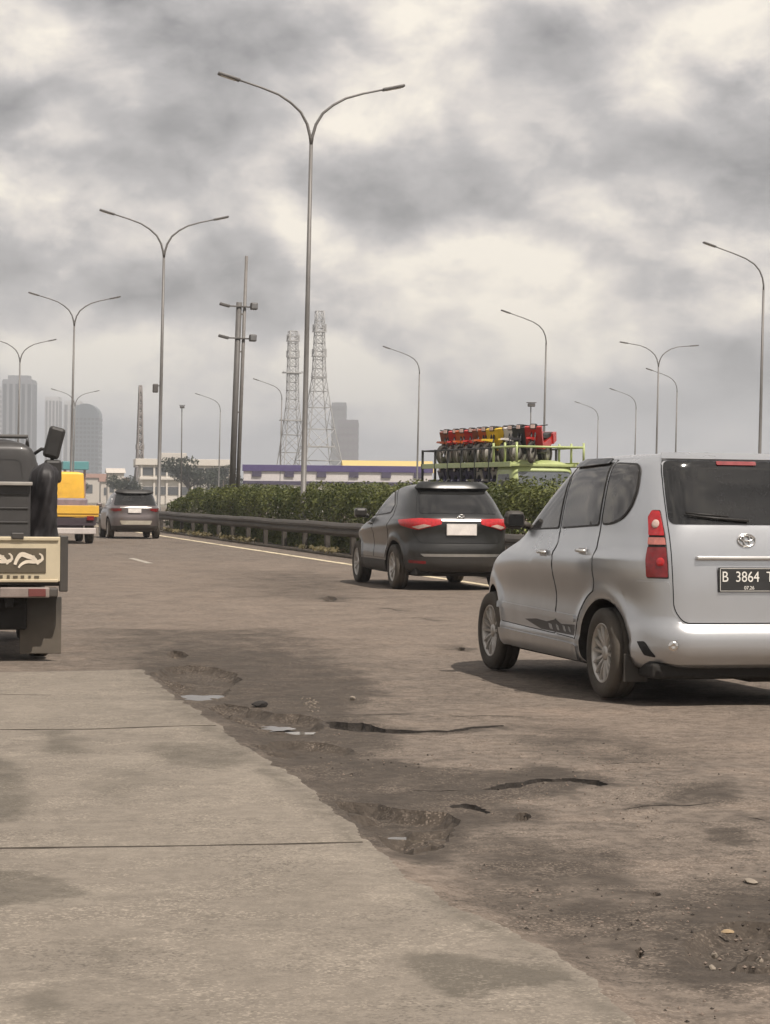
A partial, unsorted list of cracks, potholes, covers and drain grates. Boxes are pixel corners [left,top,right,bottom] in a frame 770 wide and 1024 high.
crack [326,714,504,734]
pothole [209,703,325,737]
pothole [166,650,189,659]
pothole [333,801,461,855]
crack [416,762,646,814]
pothole [150,665,243,701]
crack [624,802,715,810]
